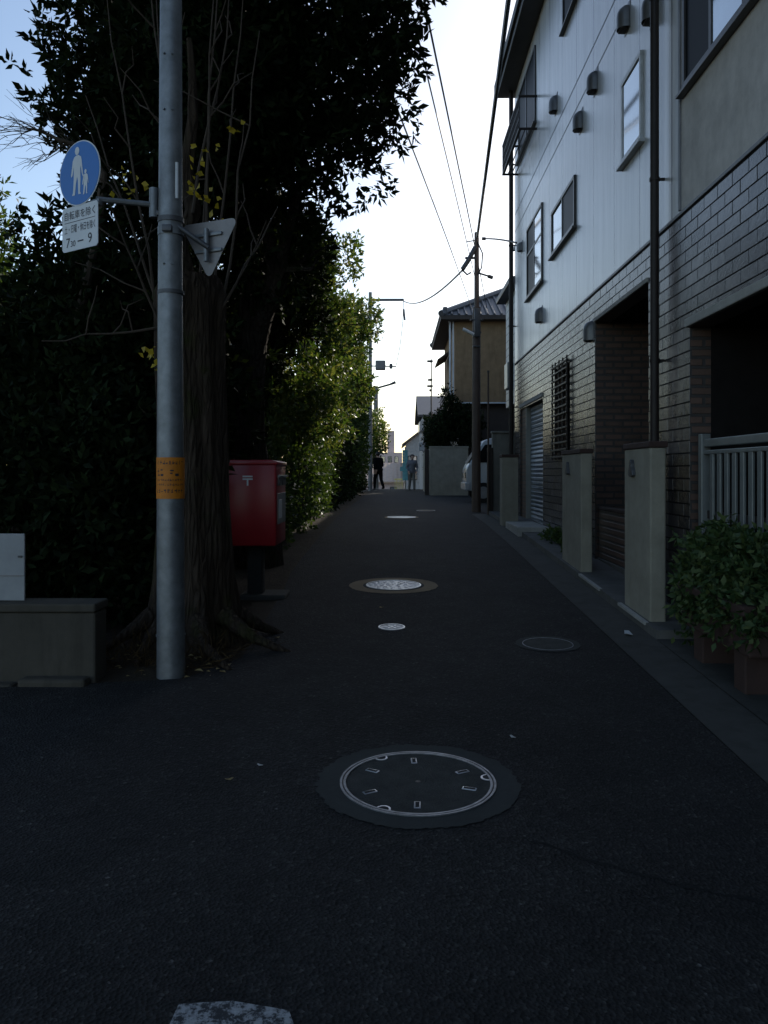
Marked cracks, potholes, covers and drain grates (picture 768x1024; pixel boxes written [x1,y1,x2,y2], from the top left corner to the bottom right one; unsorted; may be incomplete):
manhole cover [516,636,581,652]
manhole cover [315,744,522,829]
manhole cover [349,578,438,593]
